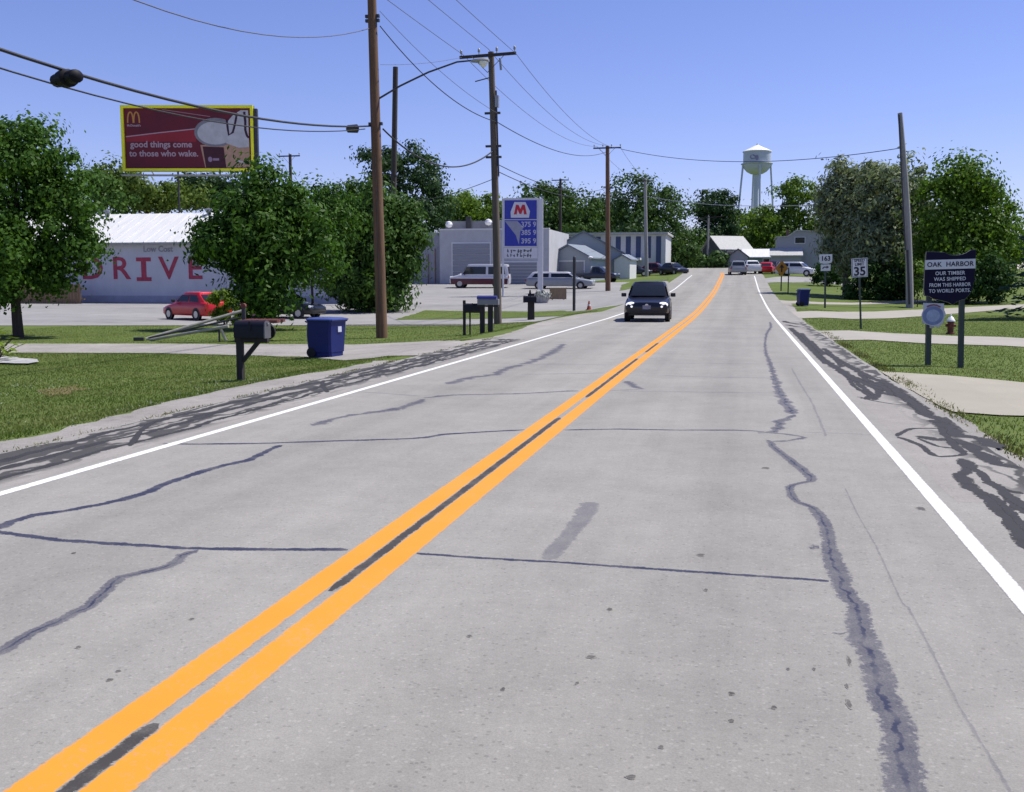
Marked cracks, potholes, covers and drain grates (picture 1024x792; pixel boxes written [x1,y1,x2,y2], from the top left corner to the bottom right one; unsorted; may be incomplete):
crack [416,488,1012,792]
crack [0,550,200,656]
crack [0,344,593,529]
